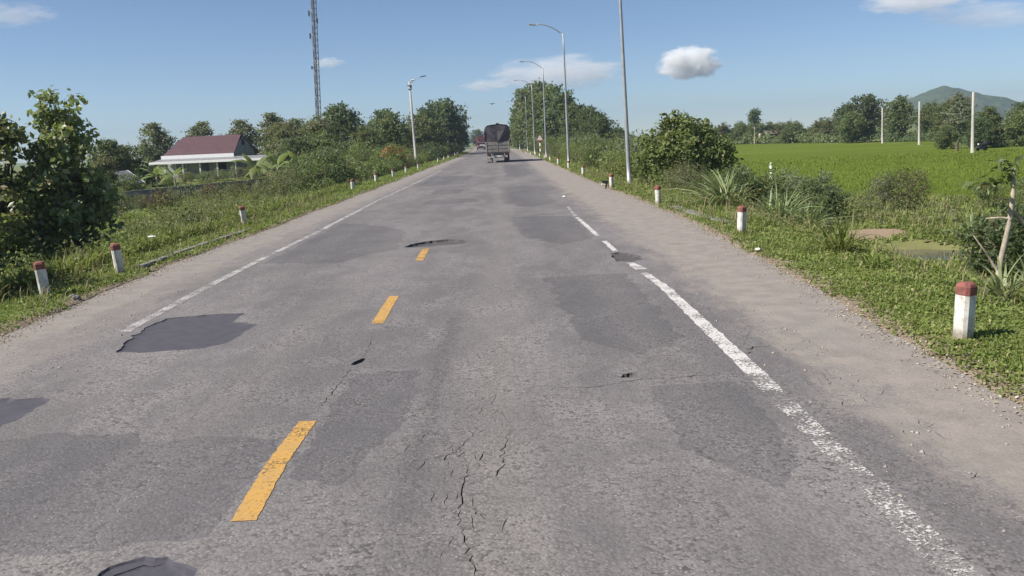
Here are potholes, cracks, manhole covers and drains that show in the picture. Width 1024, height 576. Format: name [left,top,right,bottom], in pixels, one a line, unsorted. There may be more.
crack [537,373,737,388]
crack [431,390,511,576]
pothole [611,252,642,262]
pothole [98,556,197,576]
pothole [405,239,471,248]
crack [398,389,446,477]
